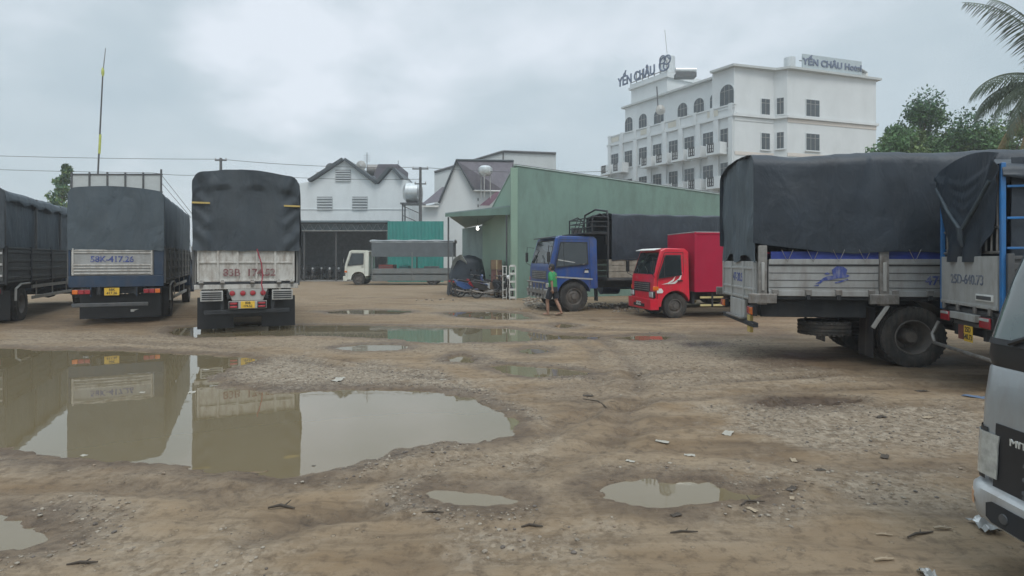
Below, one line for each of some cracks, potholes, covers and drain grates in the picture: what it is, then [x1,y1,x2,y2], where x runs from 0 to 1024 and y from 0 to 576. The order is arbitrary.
pothole [0,345,538,490]
pothole [479,361,609,379]
pothole [565,466,800,513]
pothole [399,478,550,512]
pothole [329,342,419,352]
pothole [435,310,540,320]
pothole [741,393,869,409]
pothole [159,322,609,344]
